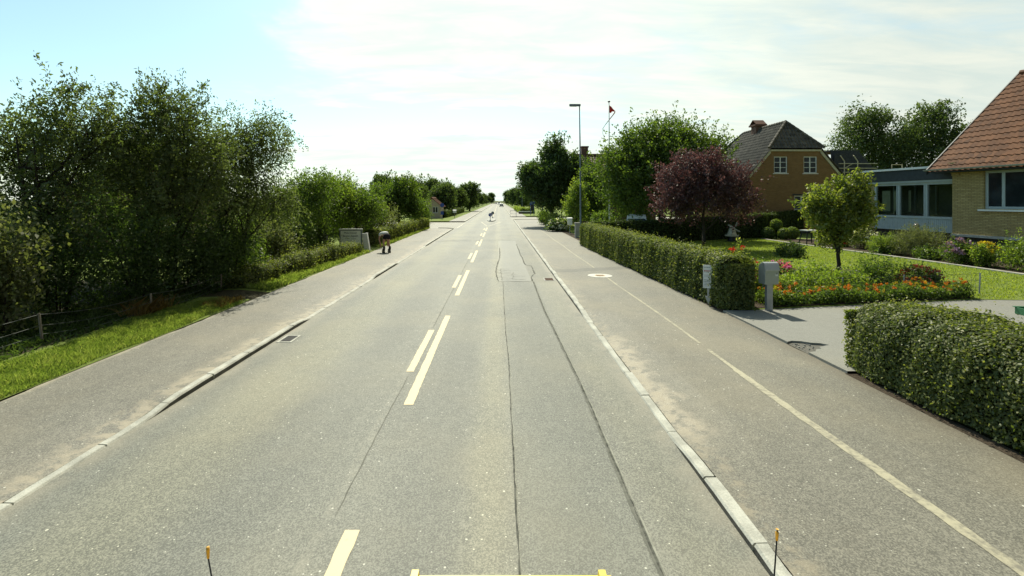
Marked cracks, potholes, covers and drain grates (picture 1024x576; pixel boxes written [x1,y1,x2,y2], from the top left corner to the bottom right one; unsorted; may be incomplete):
drain grate [276,335,302,343]
